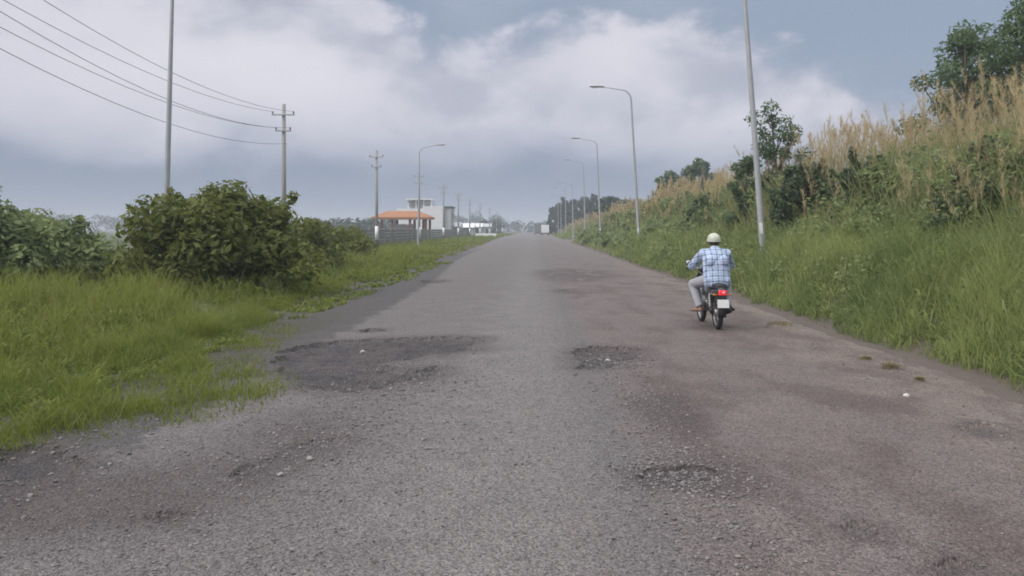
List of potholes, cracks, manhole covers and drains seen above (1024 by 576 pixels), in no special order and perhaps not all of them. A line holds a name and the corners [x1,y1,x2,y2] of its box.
pothole [635,464,722,487]
pothole [142,510,191,523]
pothole [569,346,645,370]
pothole [955,421,1019,438]
pothole [227,438,349,482]
pothole [840,518,886,543]
pothole [269,335,488,393]
pothole [930,557,976,576]
